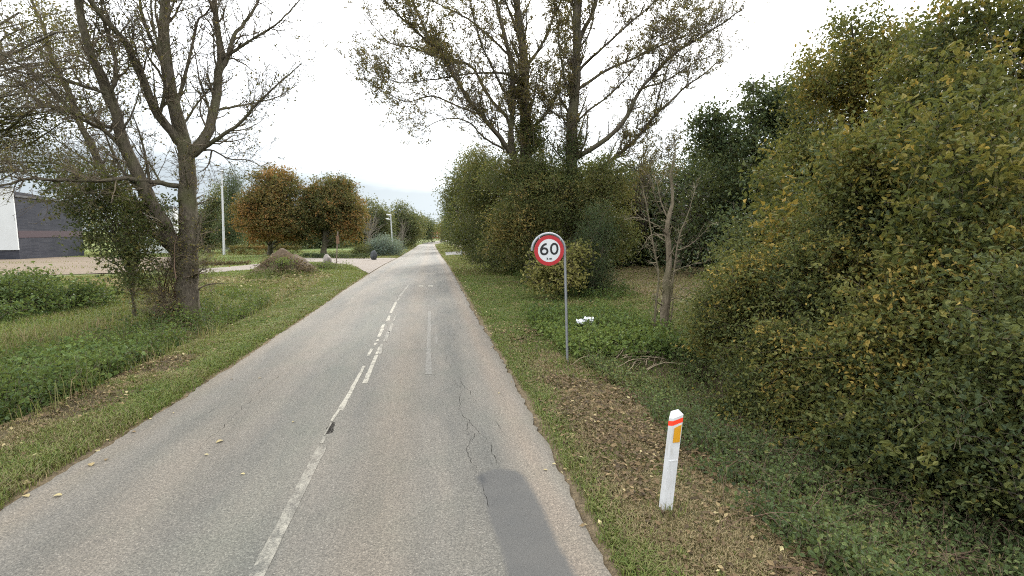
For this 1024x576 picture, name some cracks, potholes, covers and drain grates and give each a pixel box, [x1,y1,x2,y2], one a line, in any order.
crack [446,357,501,467]
